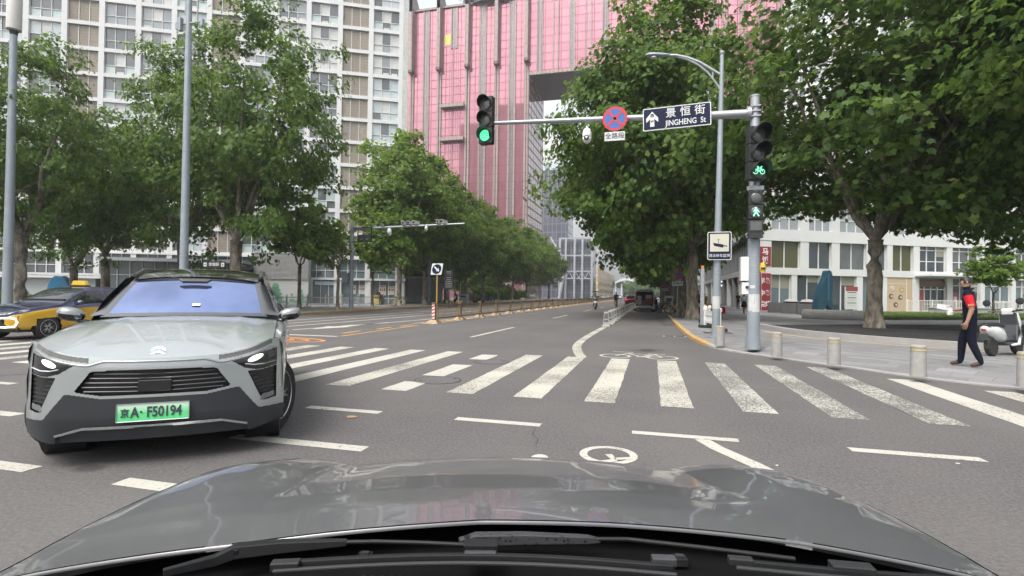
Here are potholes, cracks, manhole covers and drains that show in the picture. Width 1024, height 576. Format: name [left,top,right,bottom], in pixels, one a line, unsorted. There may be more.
manhole cover [414,376,462,384]
